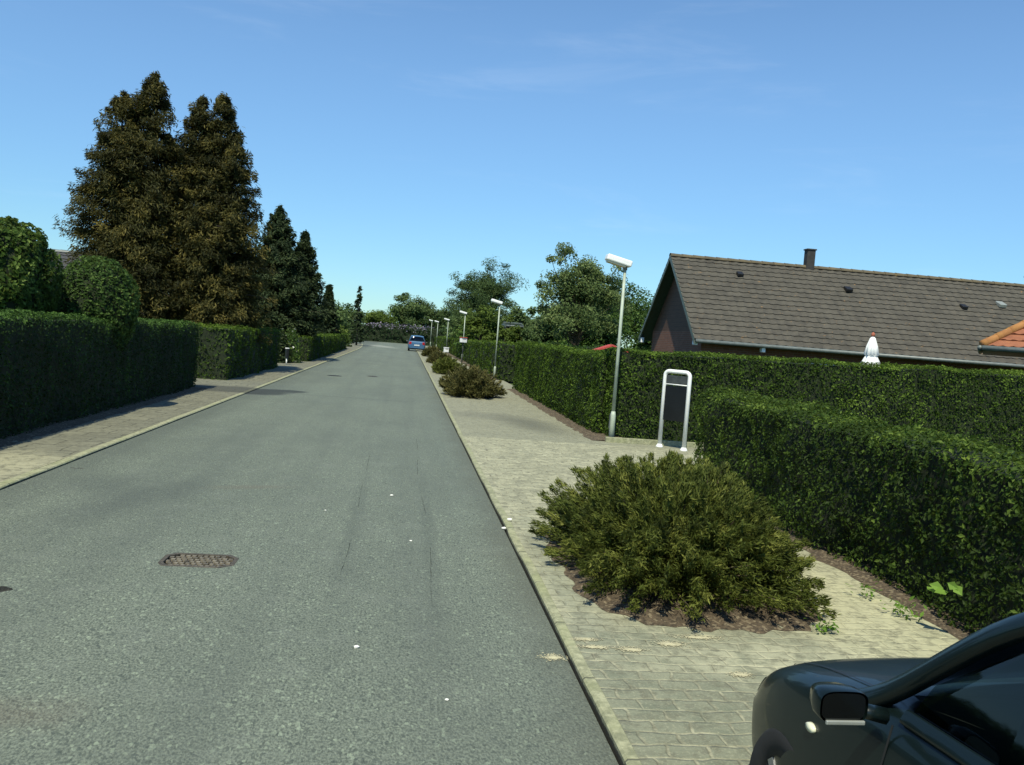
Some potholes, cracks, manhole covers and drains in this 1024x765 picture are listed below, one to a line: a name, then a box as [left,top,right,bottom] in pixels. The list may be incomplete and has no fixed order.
manhole cover [158,553,239,568]
